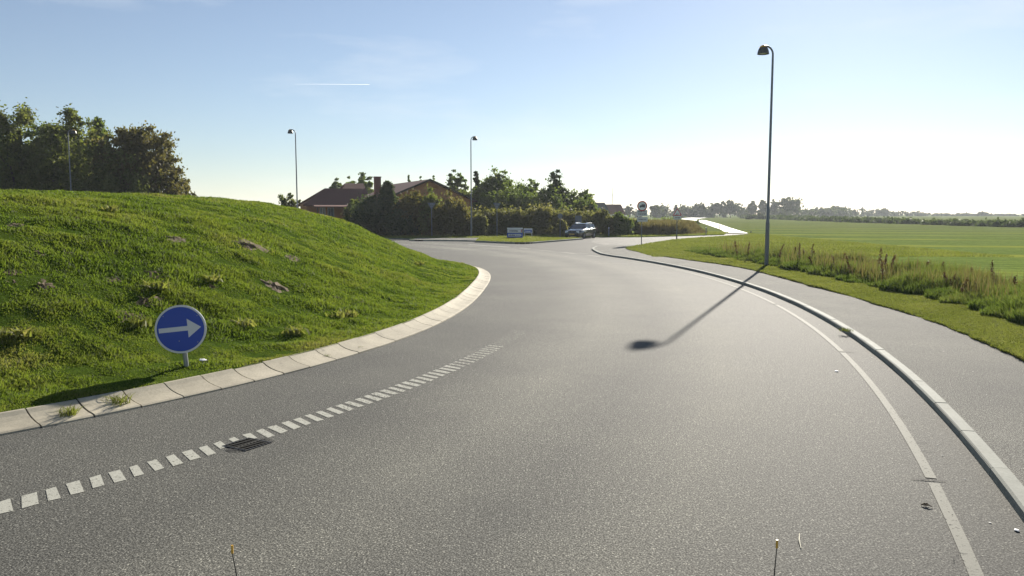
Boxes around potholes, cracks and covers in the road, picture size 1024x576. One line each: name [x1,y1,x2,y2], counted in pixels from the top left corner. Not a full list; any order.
drain grate [223,437,272,451]
